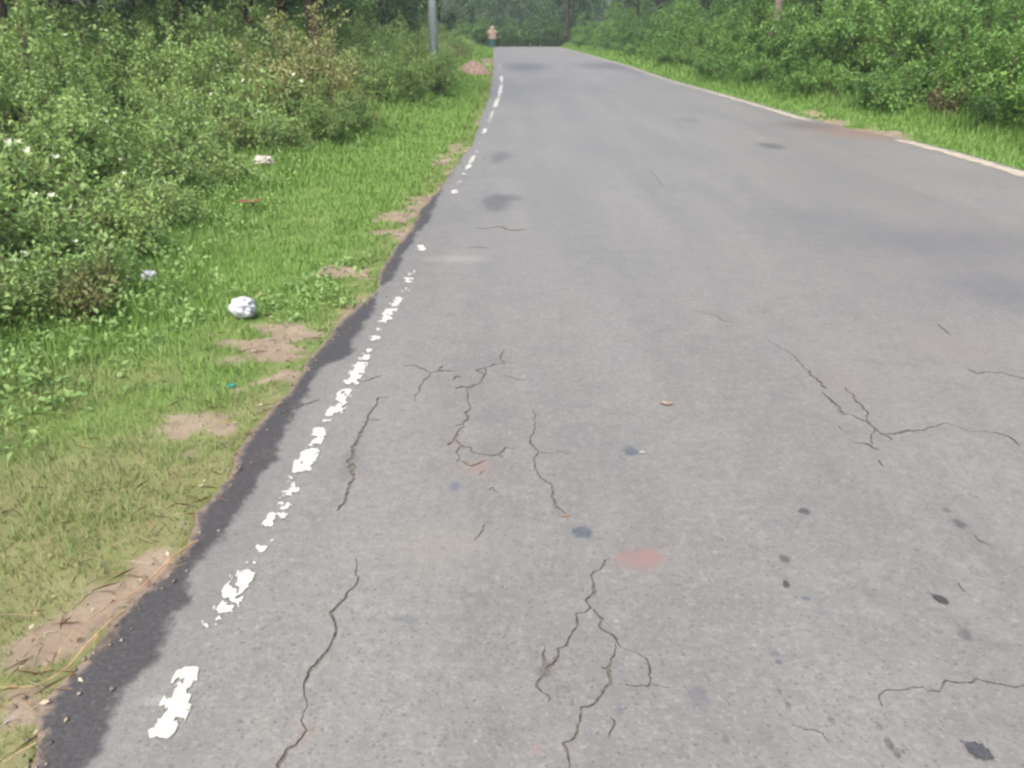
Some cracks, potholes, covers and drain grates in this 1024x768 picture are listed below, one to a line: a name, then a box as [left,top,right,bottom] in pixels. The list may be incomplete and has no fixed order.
crack [336,375,386,511]
crack [878,678,1024,706]
crack [768,340,1019,467]
crack [276,558,359,768]
crack [473,226,525,248]
crack [535,559,672,768]
crack [406,350,566,514]
